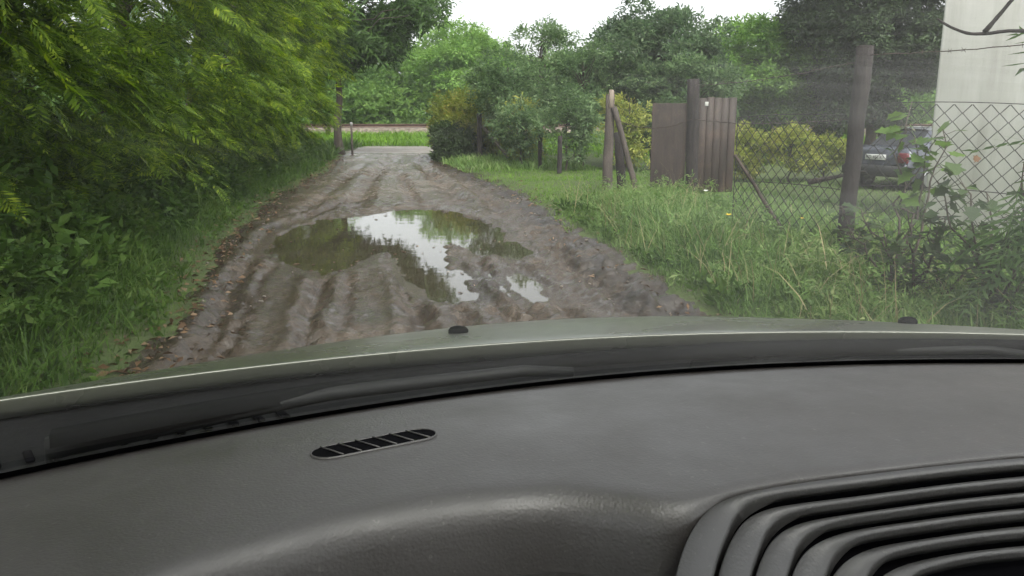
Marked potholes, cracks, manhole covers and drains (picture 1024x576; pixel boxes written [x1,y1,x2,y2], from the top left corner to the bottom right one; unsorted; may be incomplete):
pothole [250,207,515,305]
pothole [500,242,538,262]
